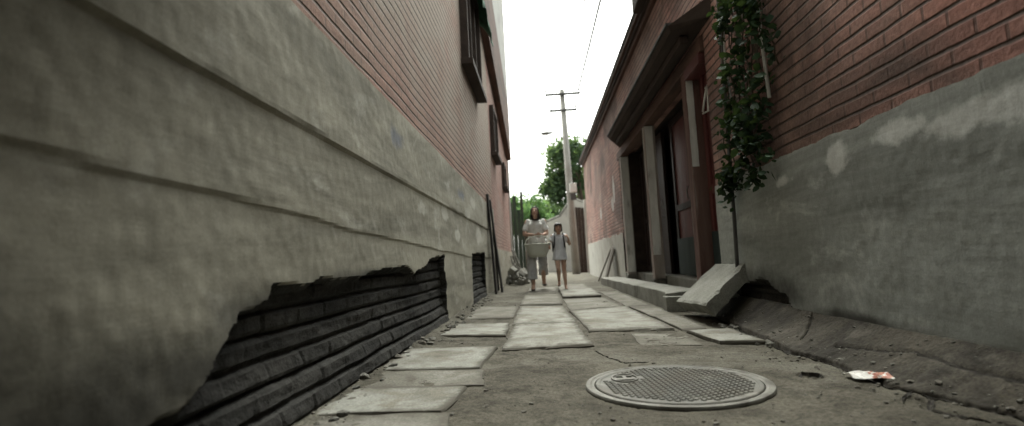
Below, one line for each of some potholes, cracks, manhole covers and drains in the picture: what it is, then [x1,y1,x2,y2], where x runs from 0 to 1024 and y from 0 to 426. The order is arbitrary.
pothole [798,372,825,380]
manhole cover [585,365,777,412]
crack [595,350,647,364]
